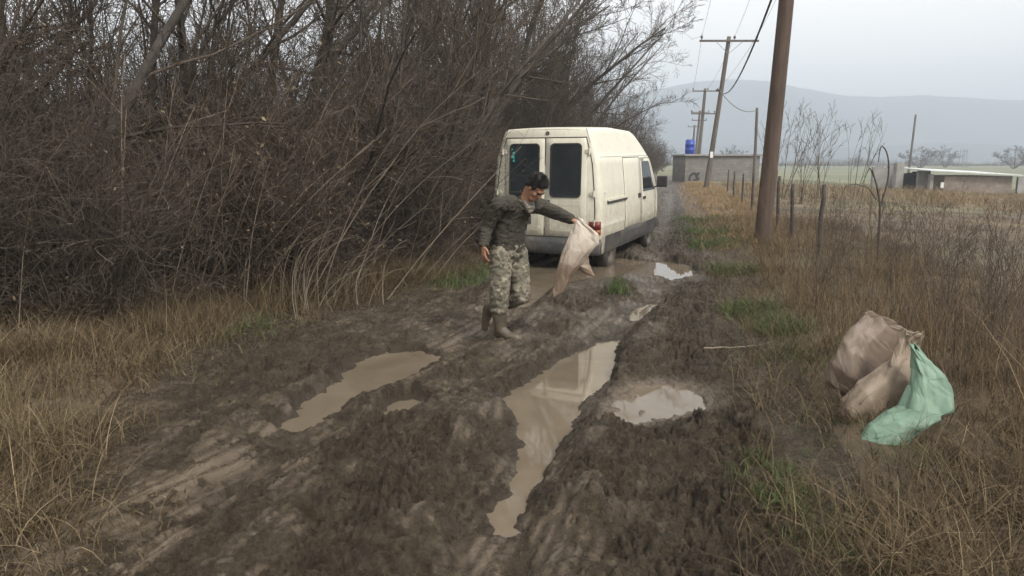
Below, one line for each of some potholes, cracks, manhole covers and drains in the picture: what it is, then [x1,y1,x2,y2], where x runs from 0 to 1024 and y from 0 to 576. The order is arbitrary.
pothole [596,376,727,427]
